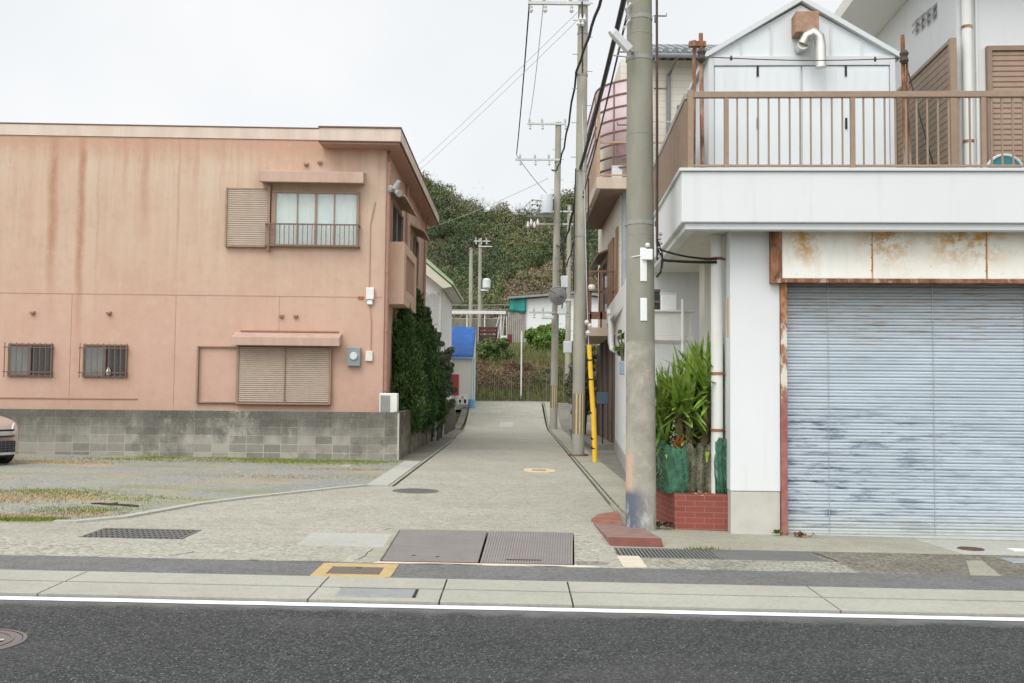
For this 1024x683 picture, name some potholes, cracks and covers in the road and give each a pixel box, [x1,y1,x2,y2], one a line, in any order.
manhole cover [310,563,399,578]
drain grate [79,528,201,539]
drain grate [616,547,723,559]
manhole cover [0,629,27,650]
